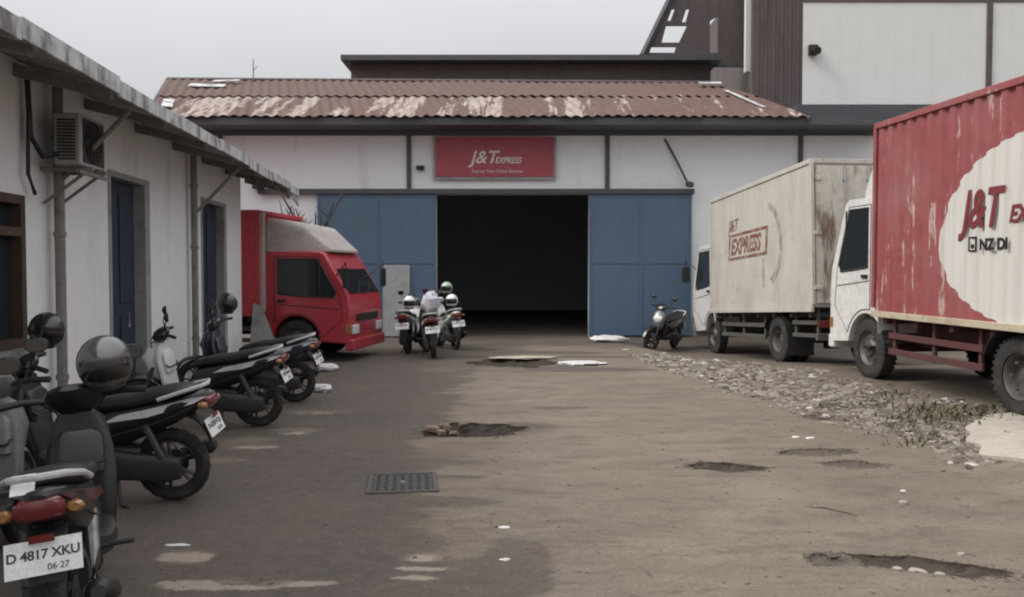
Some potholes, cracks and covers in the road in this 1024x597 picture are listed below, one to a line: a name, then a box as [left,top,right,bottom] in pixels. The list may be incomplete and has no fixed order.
pothole [421,422,531,438]
pothole [809,553,843,565]
crack [805,506,858,517]
pothole [779,448,856,456]
pothole [821,460,883,468]
pothole [683,462,770,472]
pothole [465,358,558,368]
